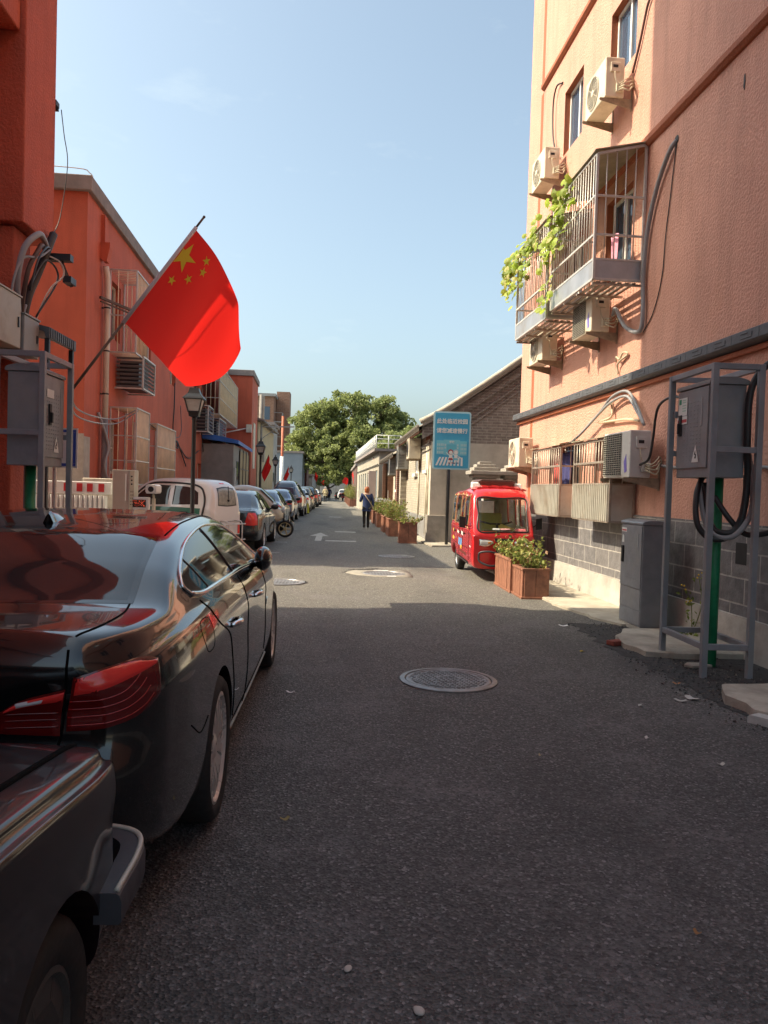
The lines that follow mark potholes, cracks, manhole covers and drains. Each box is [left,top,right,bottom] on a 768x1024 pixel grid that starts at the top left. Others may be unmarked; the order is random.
manhole cover [346,570,413,578]
manhole cover [400,668,497,693]
